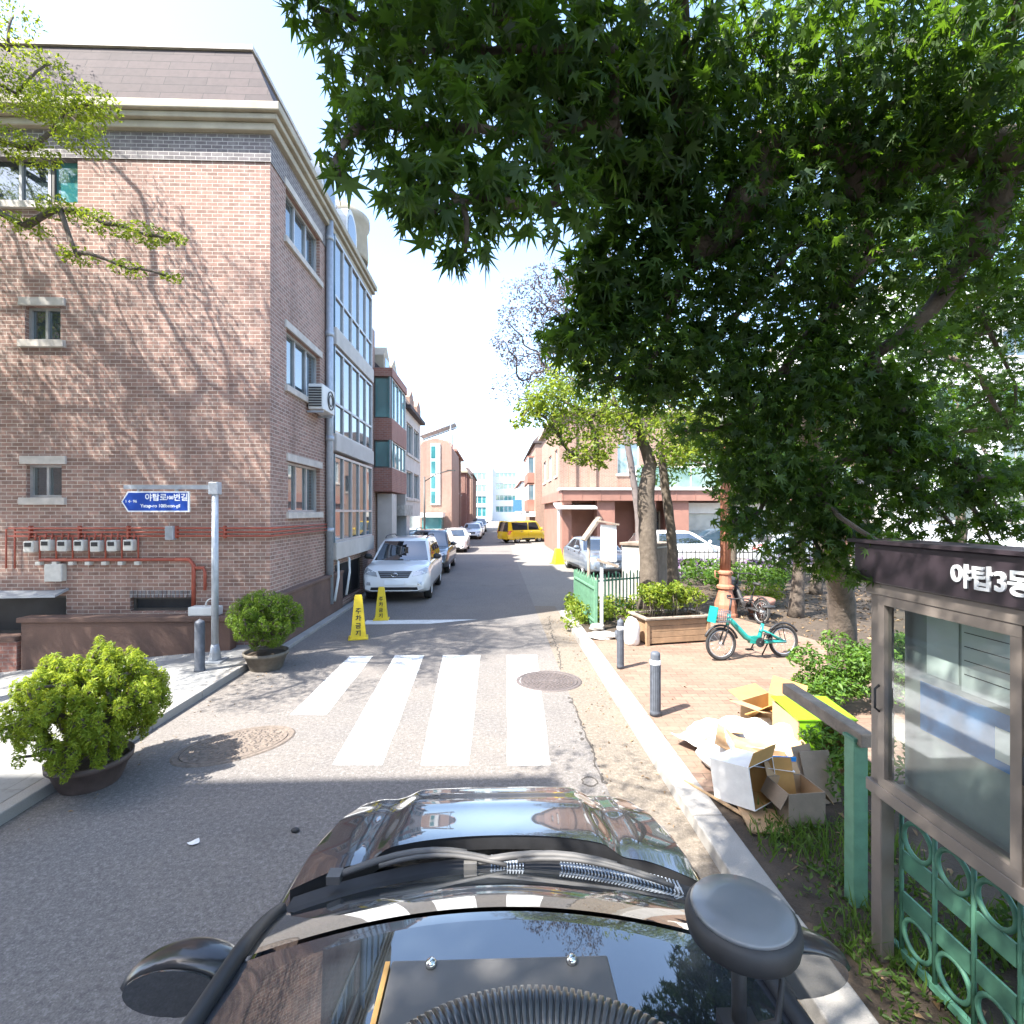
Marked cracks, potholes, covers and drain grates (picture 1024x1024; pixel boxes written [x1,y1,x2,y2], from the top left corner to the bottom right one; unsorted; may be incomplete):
manhole cover [516,671,582,692]
manhole cover [169,725,296,768]
crack [568,697,608,786]
crack [548,616,563,669]
